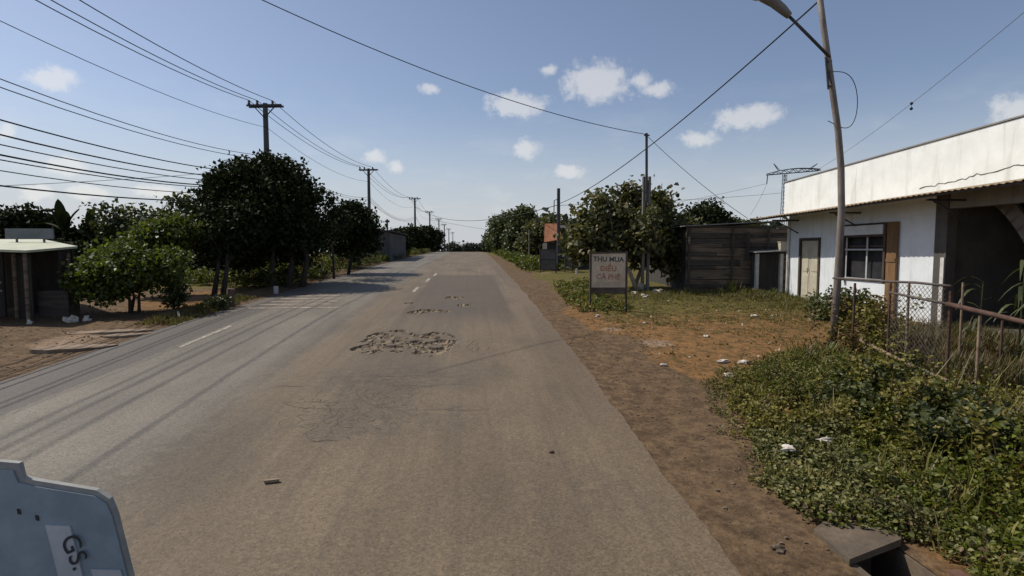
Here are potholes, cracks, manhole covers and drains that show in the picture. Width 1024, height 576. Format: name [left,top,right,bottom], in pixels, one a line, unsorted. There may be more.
crack [278,374,467,442]
pothole [349,329,458,357]
